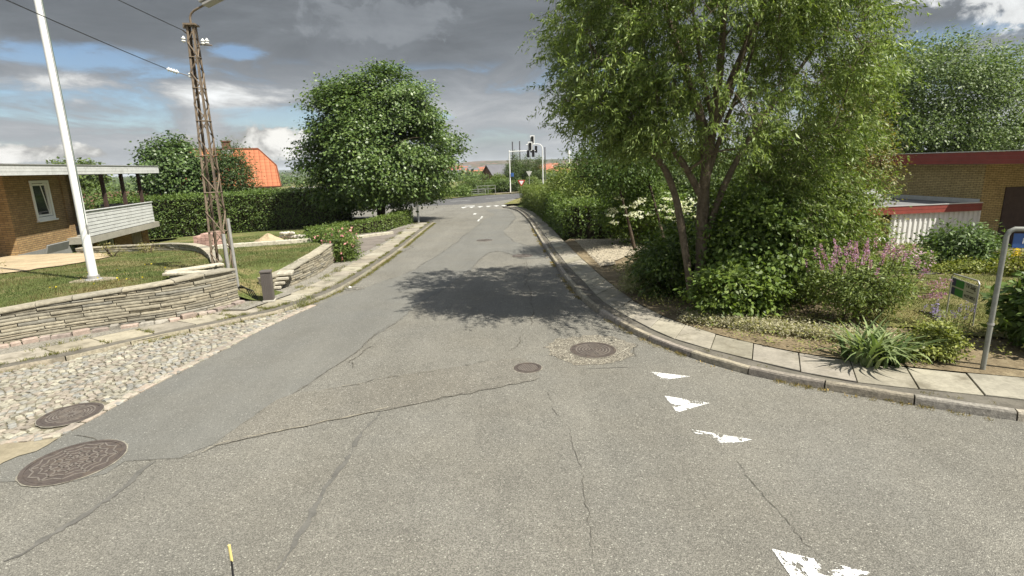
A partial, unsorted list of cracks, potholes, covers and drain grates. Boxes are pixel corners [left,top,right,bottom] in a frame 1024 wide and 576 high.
manhole cover [512,362,543,373]
crack [509,261,535,351]
crack [539,383,595,566]
manhole cover [569,342,617,358]
crack [275,411,382,571]
crack [738,462,824,560]
manhole cover [34,402,105,428]
manhole cover [15,439,128,487]
